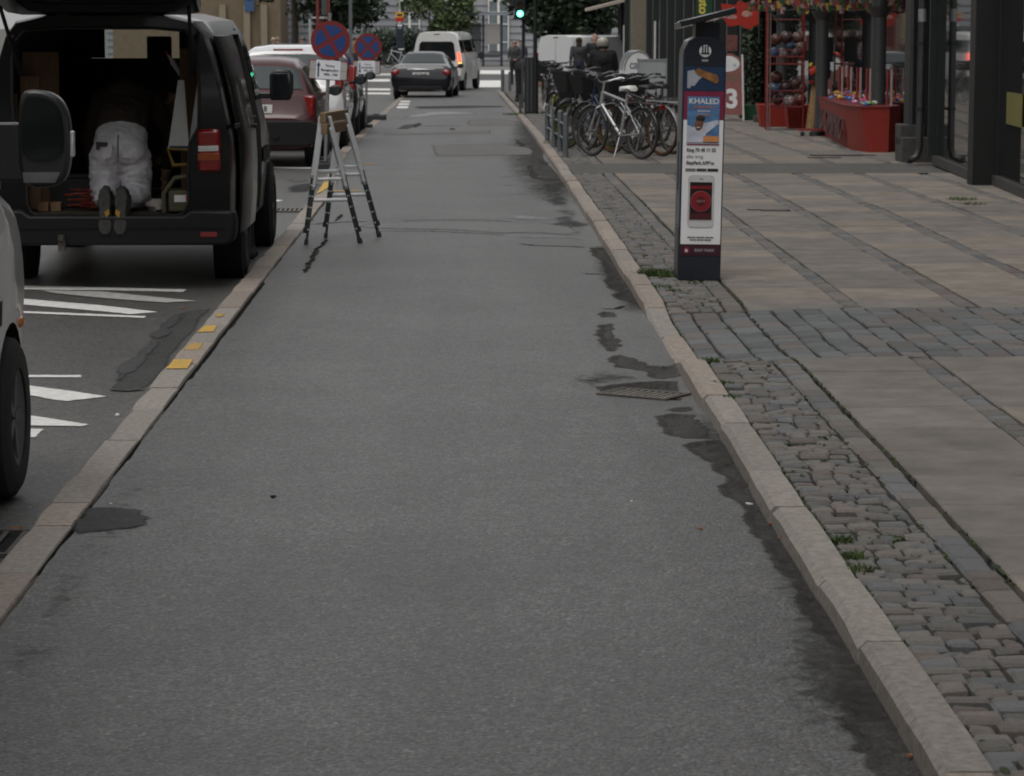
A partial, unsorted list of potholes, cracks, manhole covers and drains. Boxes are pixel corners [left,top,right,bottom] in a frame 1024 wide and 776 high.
drain grate [0,528,32,559]
drain grate [596,387,691,401]
crack [303,214,367,273]
